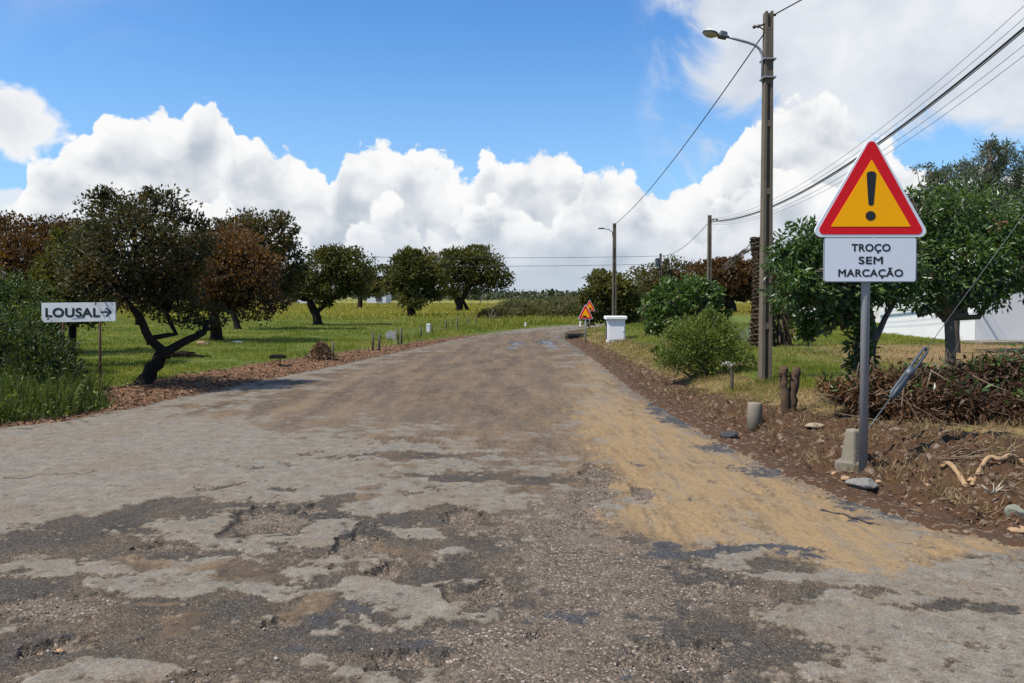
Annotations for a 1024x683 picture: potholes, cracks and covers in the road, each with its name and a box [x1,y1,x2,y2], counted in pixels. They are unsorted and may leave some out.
pothole [213,503,365,538]
pothole [4,634,131,658]
pothole [433,572,549,618]
pothole [363,555,420,580]
pothole [316,523,411,570]
